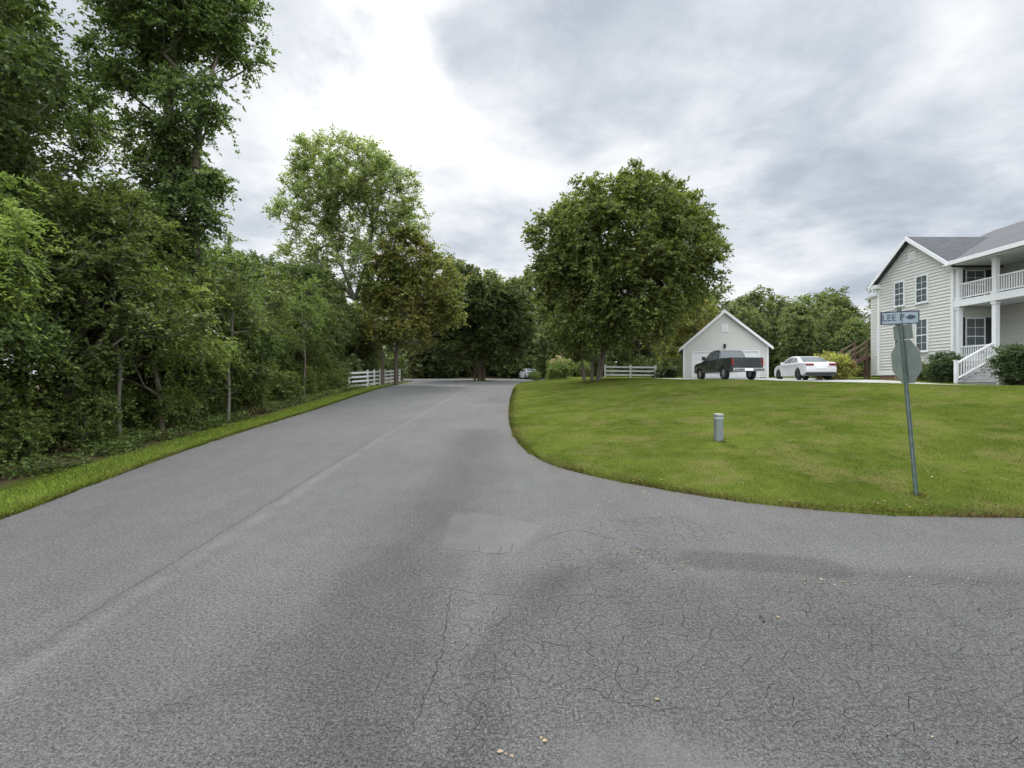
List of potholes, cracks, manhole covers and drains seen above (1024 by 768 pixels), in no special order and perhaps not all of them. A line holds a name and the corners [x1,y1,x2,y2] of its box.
crack [546,516,738,580]
crack [435,578,1024,768]
